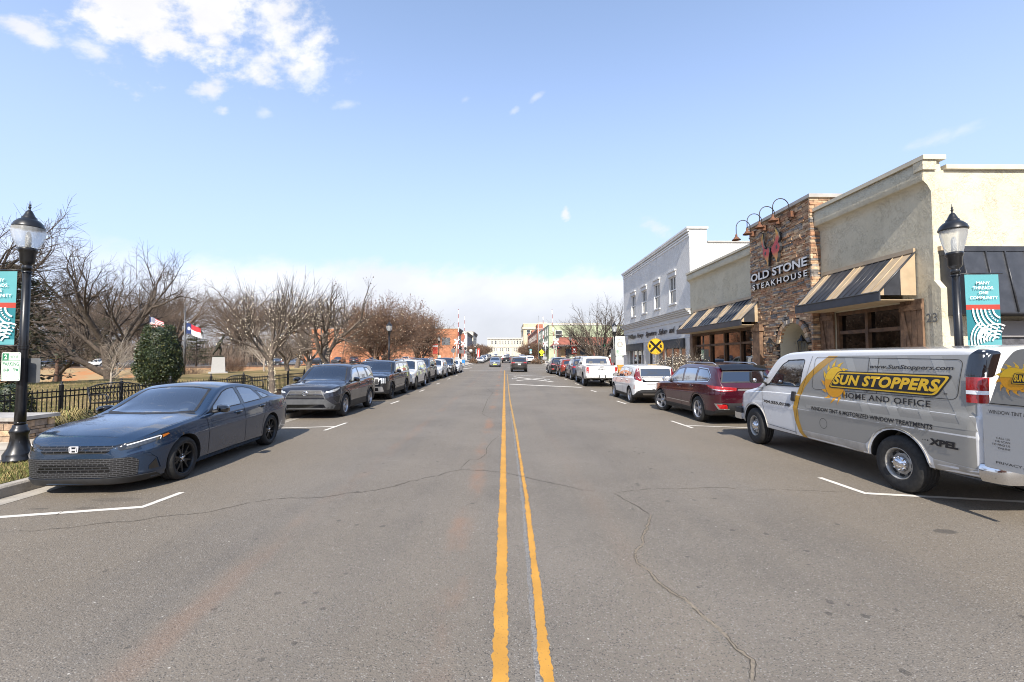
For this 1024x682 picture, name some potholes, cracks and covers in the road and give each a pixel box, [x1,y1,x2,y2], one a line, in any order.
crack [36,436,836,682]
